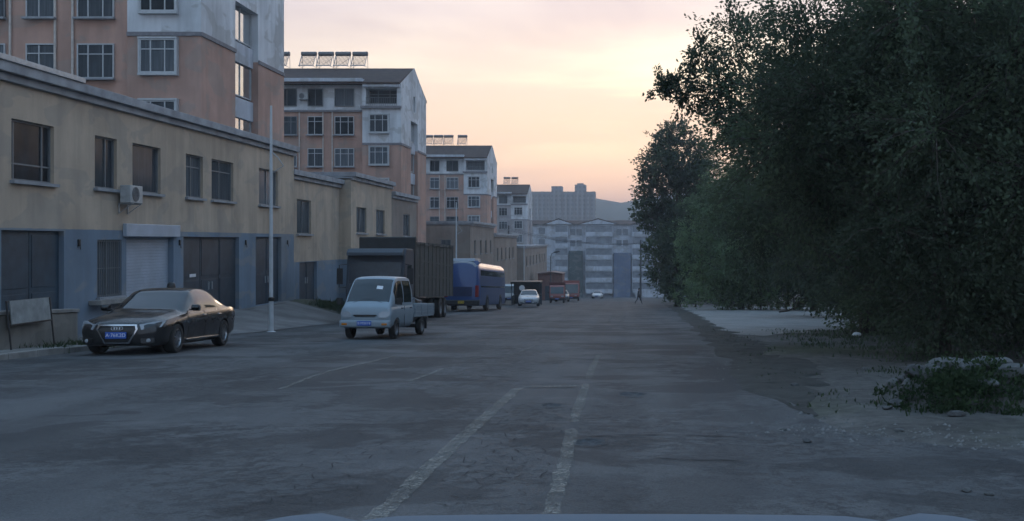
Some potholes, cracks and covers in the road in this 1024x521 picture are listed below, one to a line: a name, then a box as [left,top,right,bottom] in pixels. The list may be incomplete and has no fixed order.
crack [422,401,571,506]
